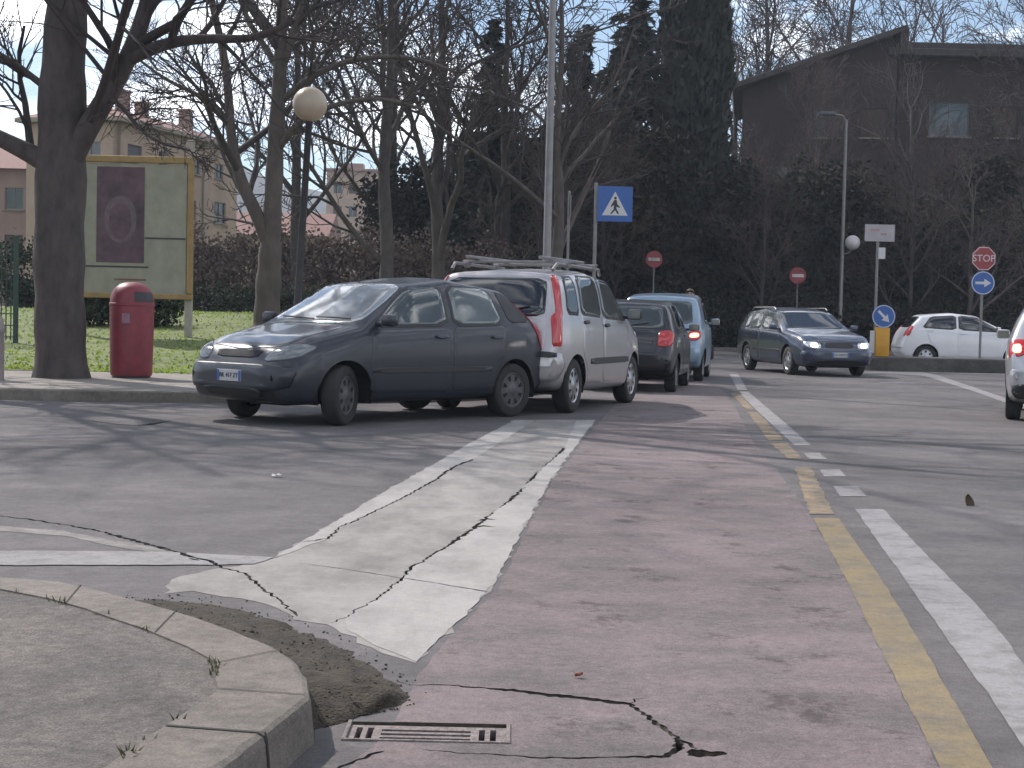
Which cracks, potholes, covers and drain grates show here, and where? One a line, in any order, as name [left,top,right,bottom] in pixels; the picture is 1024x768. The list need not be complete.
crack [336,448,565,622]
crack [2,516,298,616]
crack [465,687,698,759]
drain grate [341,719,511,765]
